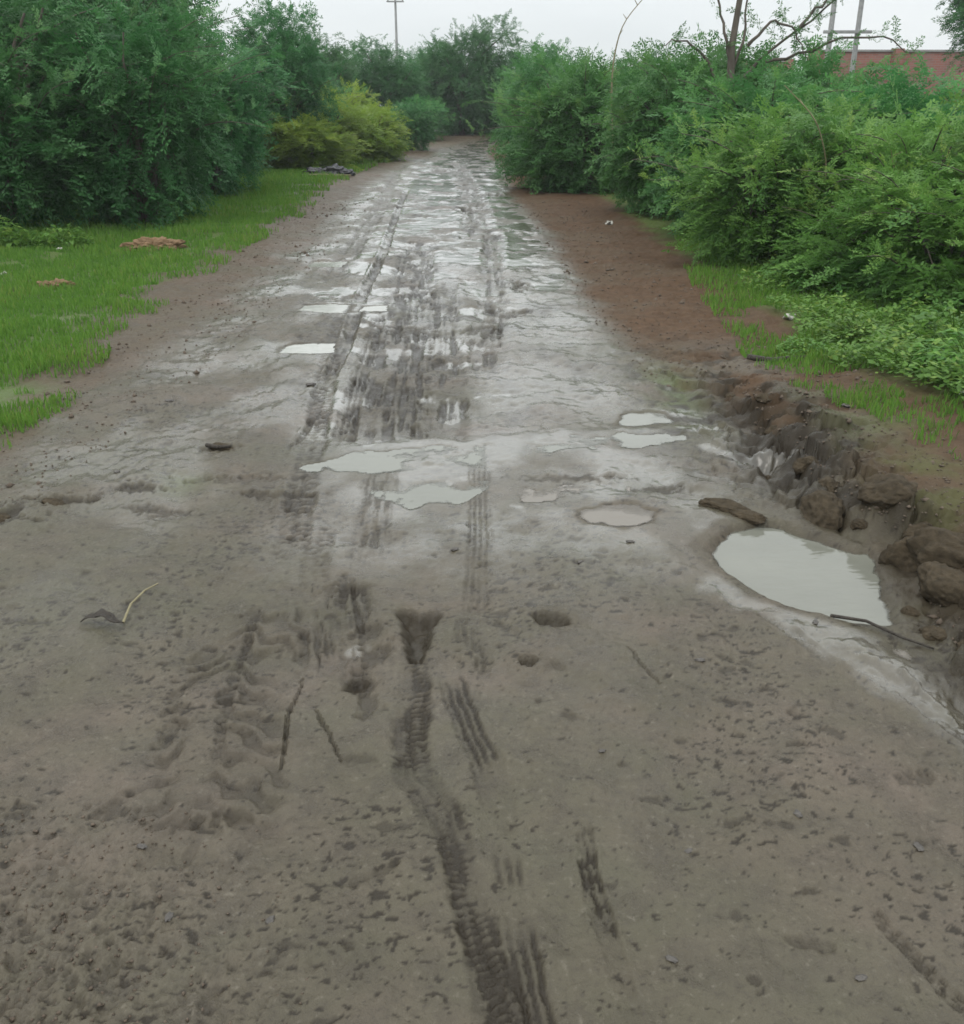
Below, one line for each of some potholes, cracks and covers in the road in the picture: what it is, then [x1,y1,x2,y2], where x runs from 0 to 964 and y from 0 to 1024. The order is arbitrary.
crack [626,646,662,685]
pothole [686,514,921,636]
pothole [390,605,451,667]
pothole [523,608,578,629]
